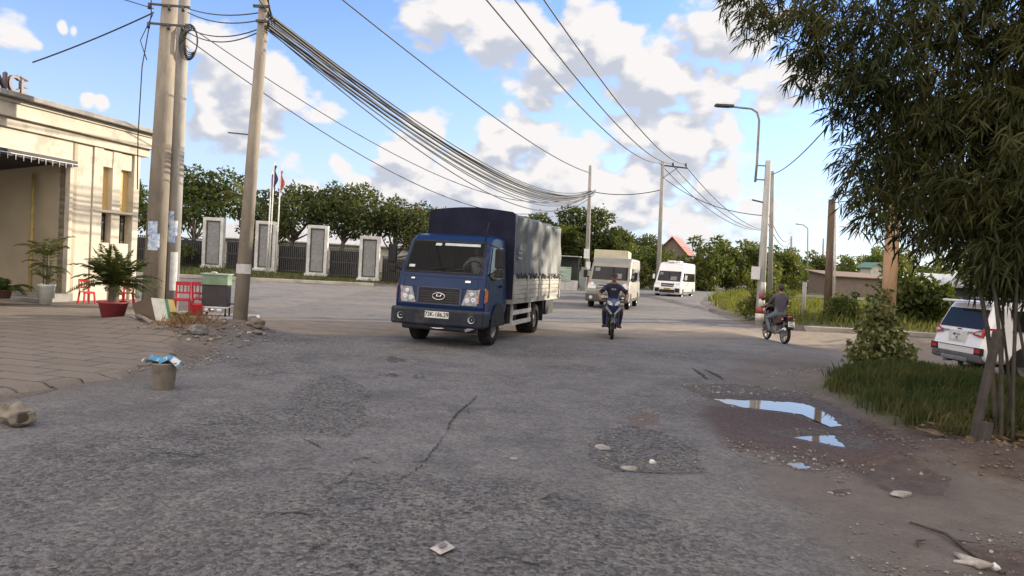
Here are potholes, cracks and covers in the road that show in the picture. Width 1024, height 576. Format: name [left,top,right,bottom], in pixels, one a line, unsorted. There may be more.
pothole [679,384,863,431]
pothole [766,428,875,450]
crack [395,395,477,481]
